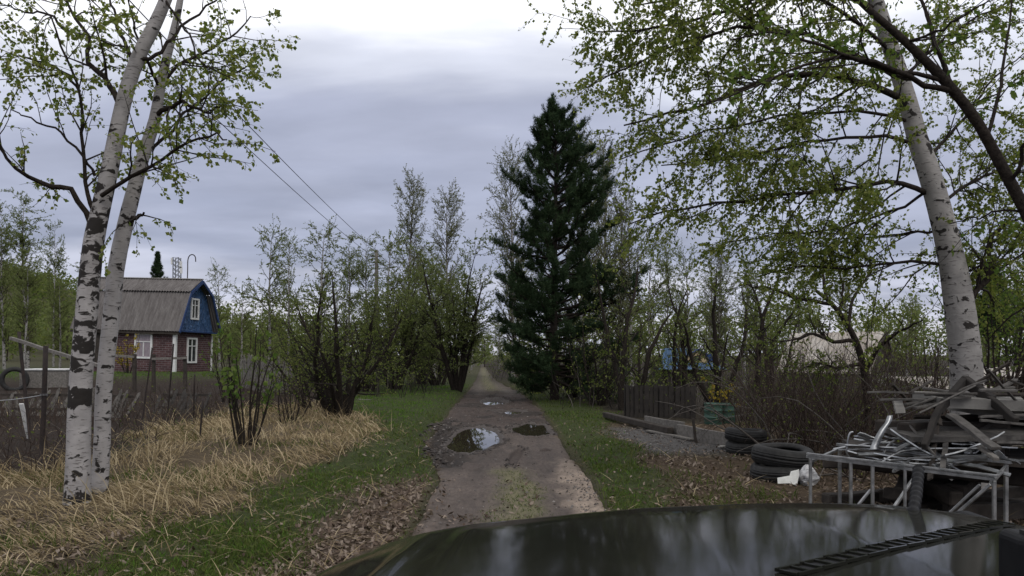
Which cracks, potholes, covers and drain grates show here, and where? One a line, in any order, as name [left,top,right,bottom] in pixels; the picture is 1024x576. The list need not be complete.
pothole [443,425,505,455]
pothole [479,397,511,406]
pothole [508,422,557,437]
